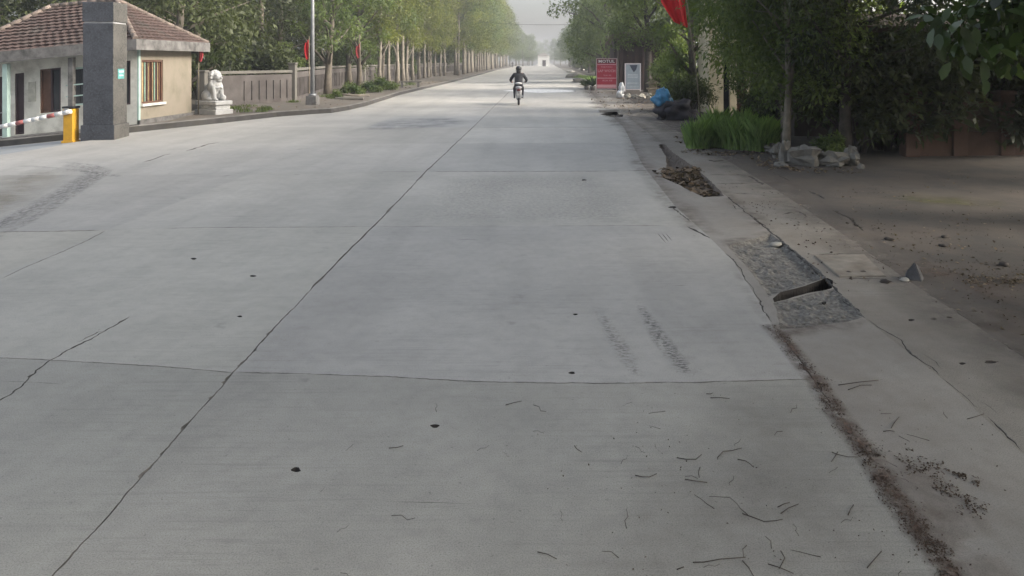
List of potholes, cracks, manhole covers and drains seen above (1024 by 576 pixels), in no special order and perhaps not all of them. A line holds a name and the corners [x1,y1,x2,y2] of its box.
crack [927,356,1023,452]
crack [785,191,863,231]
